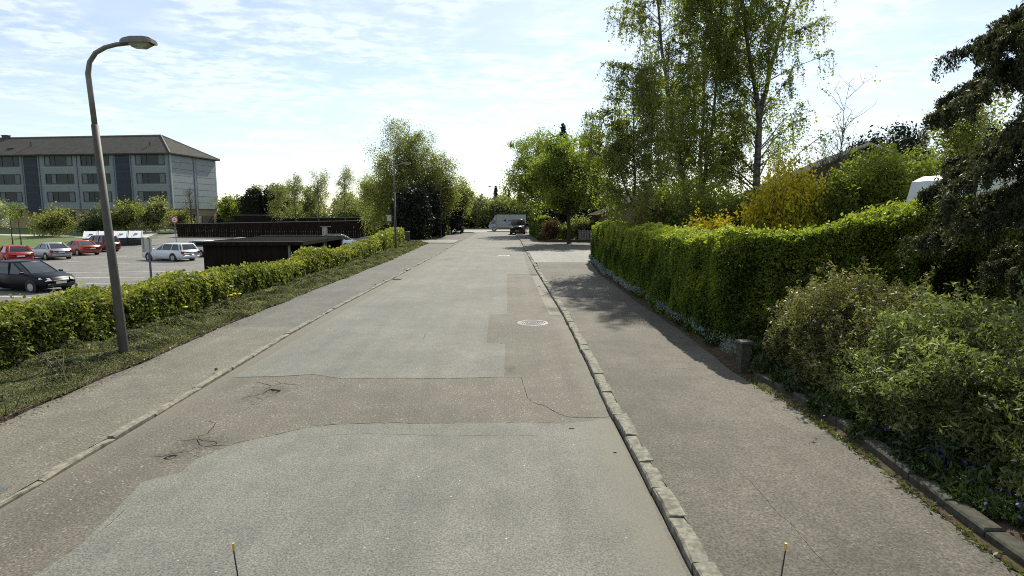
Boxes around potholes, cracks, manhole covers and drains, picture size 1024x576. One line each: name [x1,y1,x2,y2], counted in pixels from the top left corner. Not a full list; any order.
crack [737,471,836,574]
crack [157,378,605,462]
